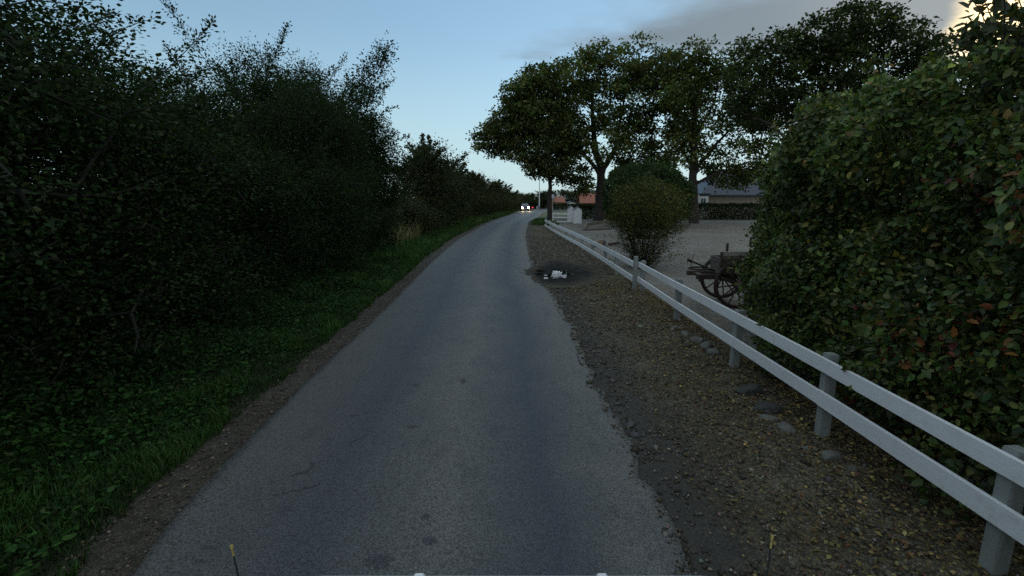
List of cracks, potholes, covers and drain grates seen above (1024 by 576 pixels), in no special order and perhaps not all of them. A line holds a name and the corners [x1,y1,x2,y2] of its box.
crack [270,461,321,497]
pothole [524,258,612,288]
